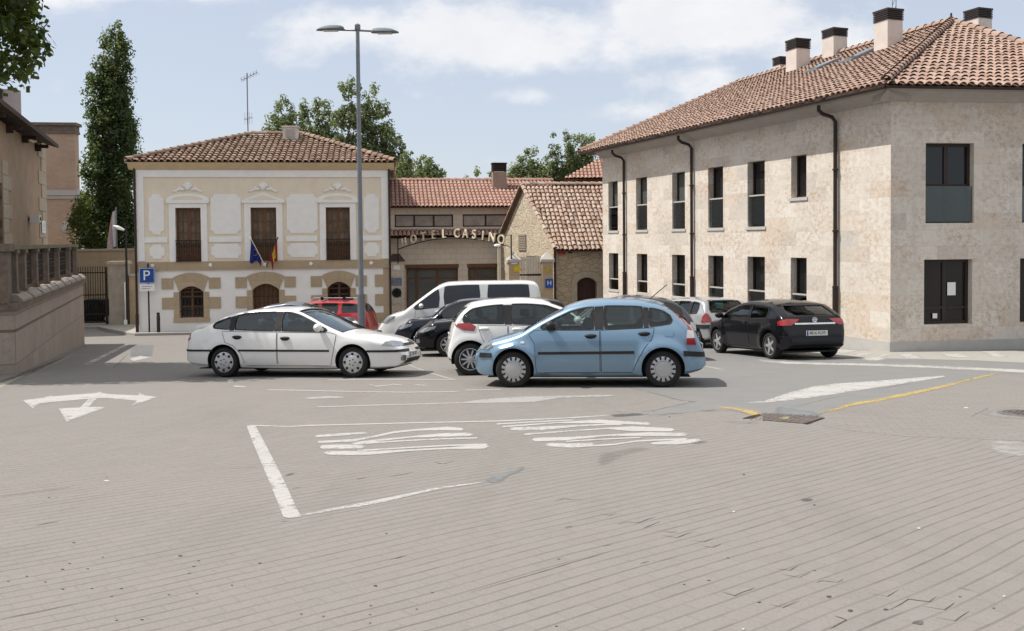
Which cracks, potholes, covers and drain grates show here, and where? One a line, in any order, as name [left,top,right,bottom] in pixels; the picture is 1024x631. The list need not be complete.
manhole cover [745,413,824,424]
manhole cover [997,409,1024,417]
